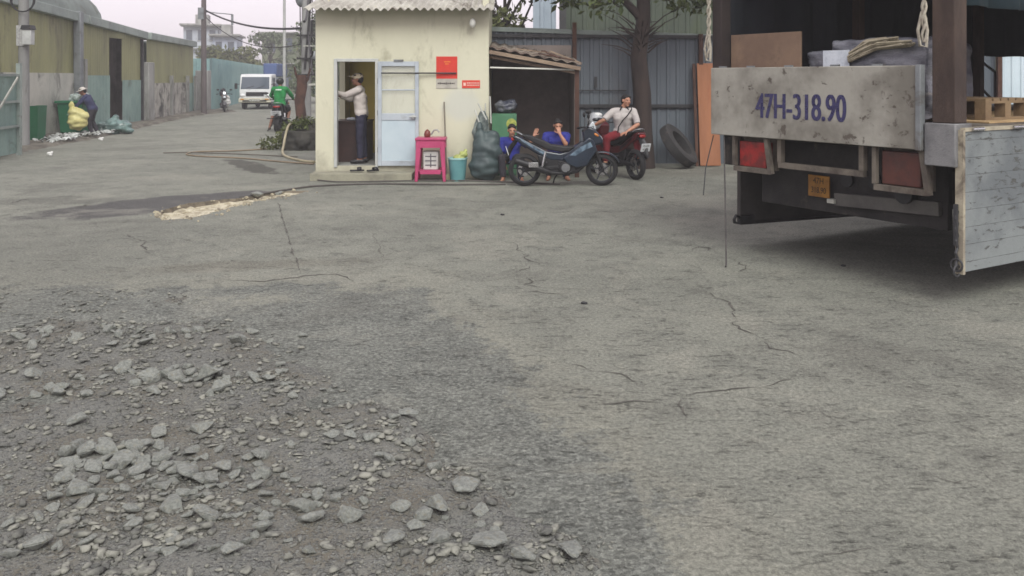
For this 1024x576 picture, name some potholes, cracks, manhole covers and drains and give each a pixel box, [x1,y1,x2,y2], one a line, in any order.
crack [488,242,582,294]
crack [558,364,831,421]
crack [233,203,354,282]
crack [703,291,800,355]
